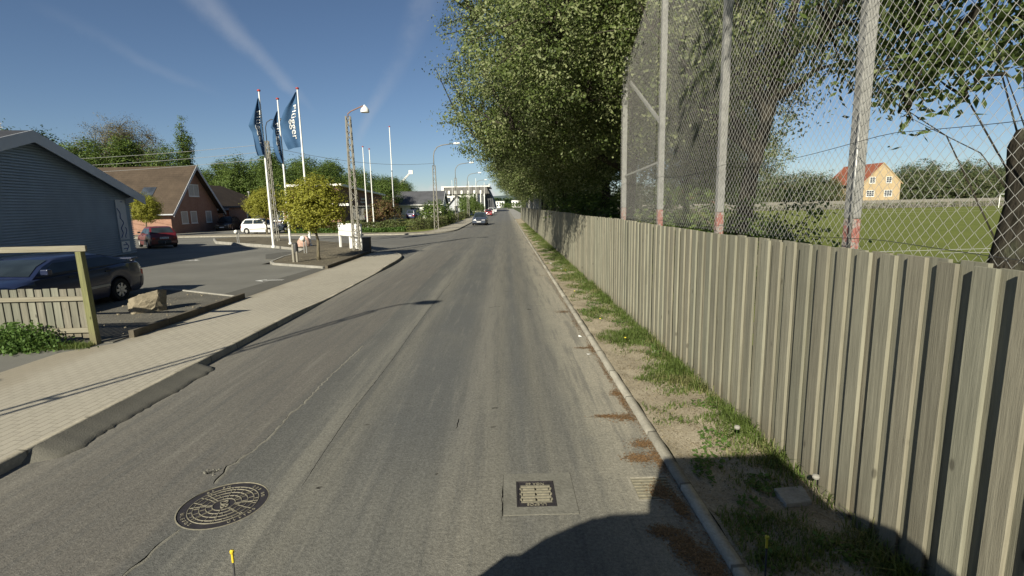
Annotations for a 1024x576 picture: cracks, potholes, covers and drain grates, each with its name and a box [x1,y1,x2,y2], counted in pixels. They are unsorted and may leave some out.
manhole cover [174,482,270,530]
drain grate [627,475,682,501]
drain grate [503,473,579,516]
